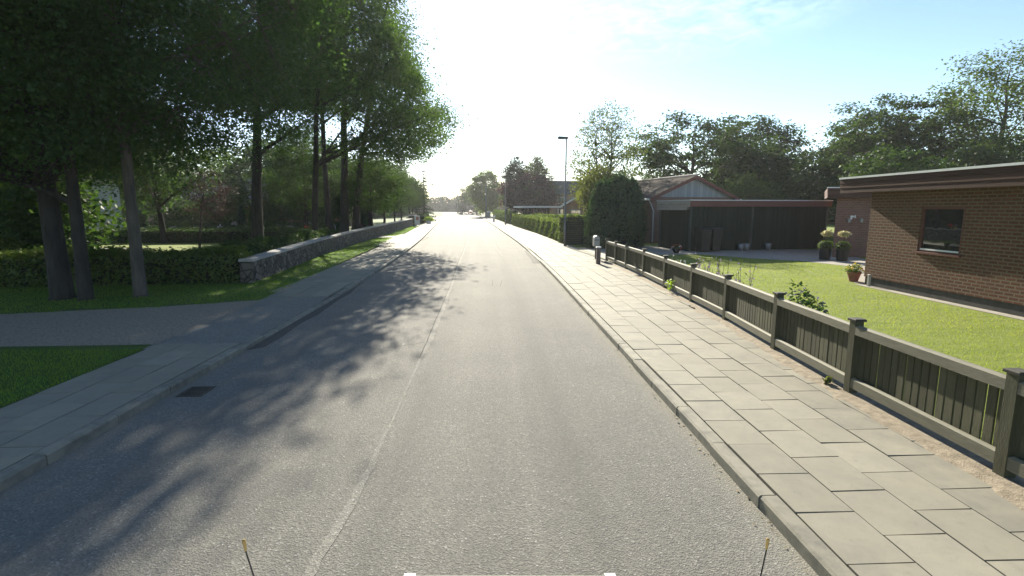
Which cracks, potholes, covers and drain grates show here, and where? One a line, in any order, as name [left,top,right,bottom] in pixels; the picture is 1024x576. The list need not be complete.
drain grate [175,386,216,397]
